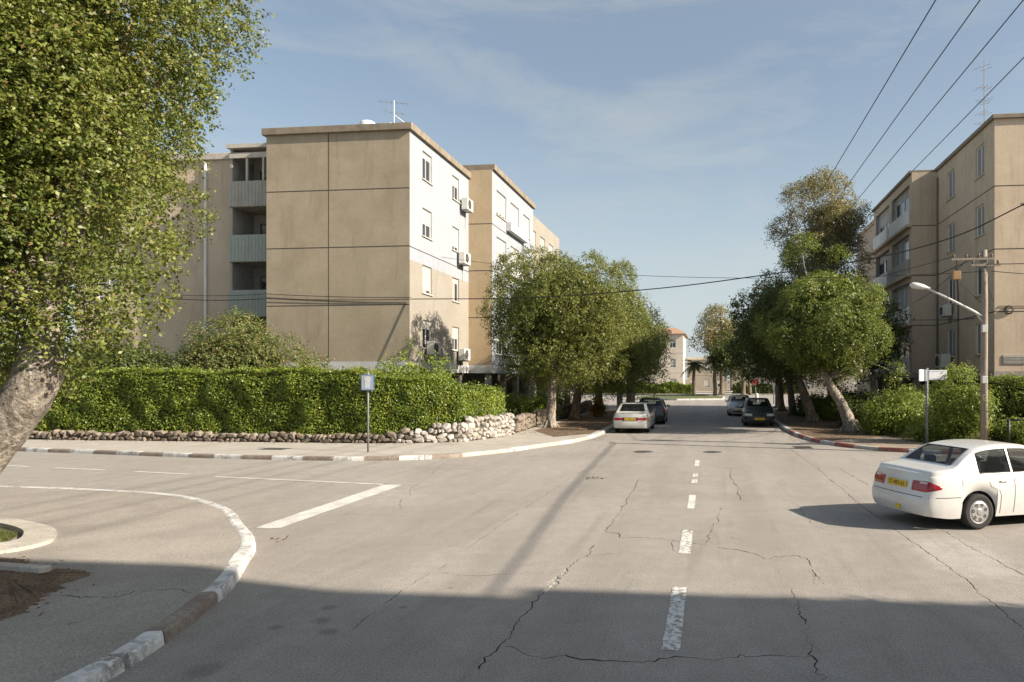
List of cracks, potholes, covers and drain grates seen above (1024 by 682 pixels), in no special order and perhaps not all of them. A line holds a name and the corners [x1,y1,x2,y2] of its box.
crack [443,466,827,681]
